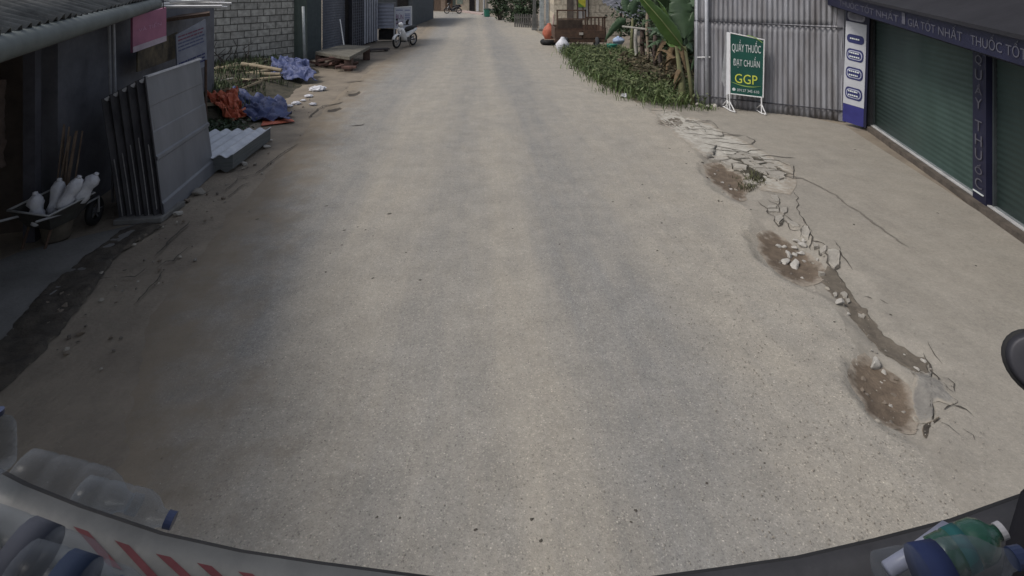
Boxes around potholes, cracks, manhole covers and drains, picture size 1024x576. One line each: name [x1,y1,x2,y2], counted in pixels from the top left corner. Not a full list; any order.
pothole [847,352,919,434]
crack [654,110,852,274]
crack [98,221,190,305]
crack [923,343,975,440]
pothole [703,163,751,201]
pothole [756,230,825,287]
